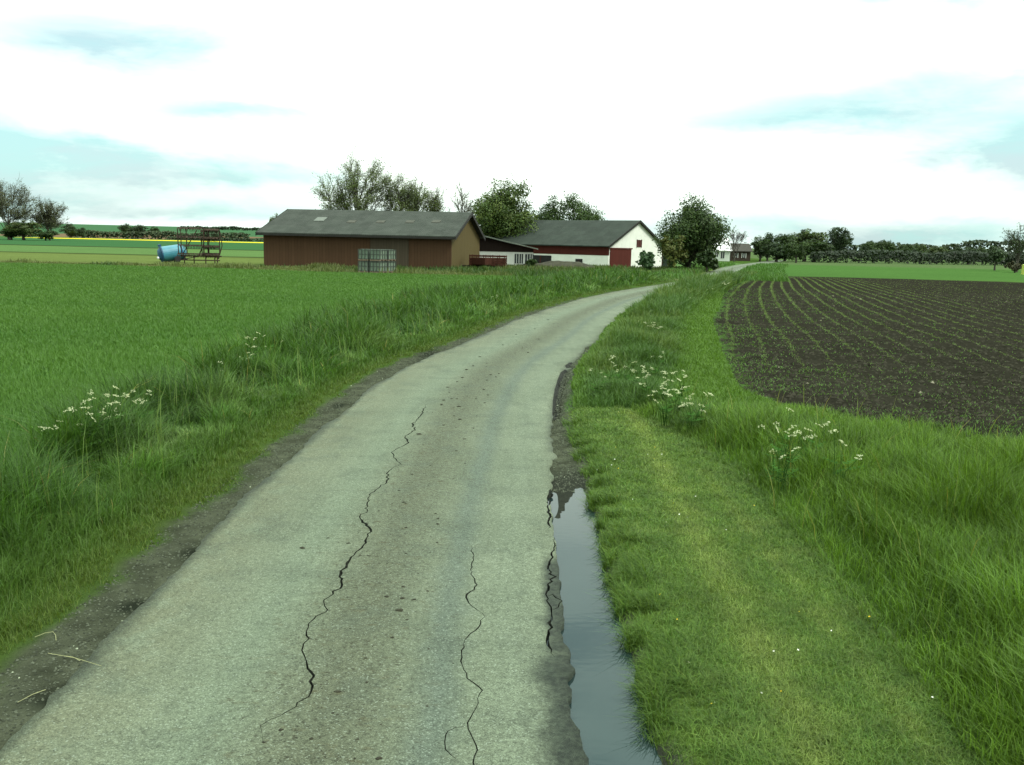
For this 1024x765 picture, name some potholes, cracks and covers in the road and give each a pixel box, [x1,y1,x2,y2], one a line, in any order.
crack [545,489,562,657]
crack [260,406,426,741]
crack [444,550,485,765]
